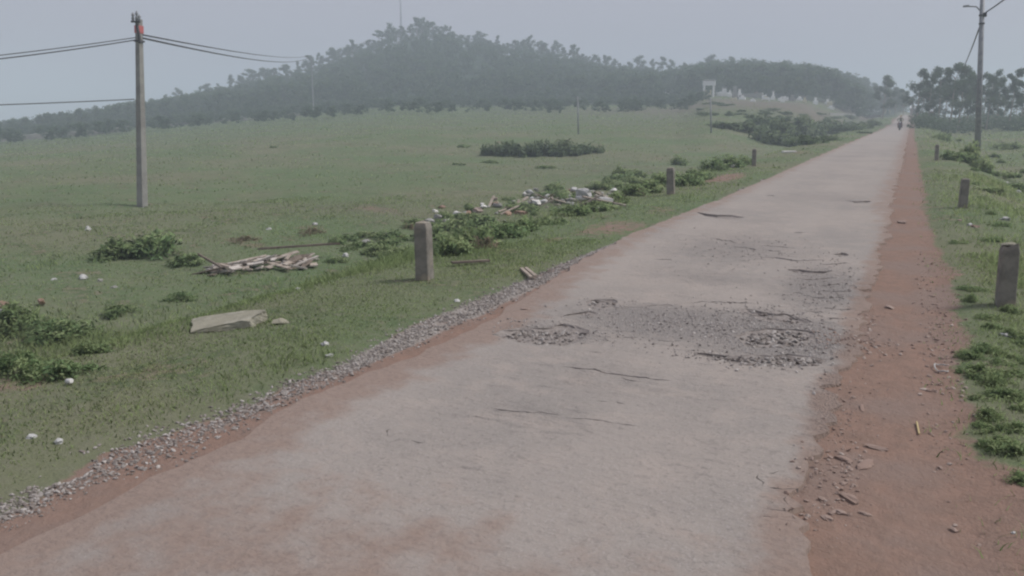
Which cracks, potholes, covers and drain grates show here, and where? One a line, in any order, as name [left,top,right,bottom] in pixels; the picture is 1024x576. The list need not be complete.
pothole [492,323,590,346]
crack [713,232,856,319]
crack [571,333,672,382]
crack [476,401,643,427]
pothole [693,352,827,367]
pothole [733,328,818,348]
